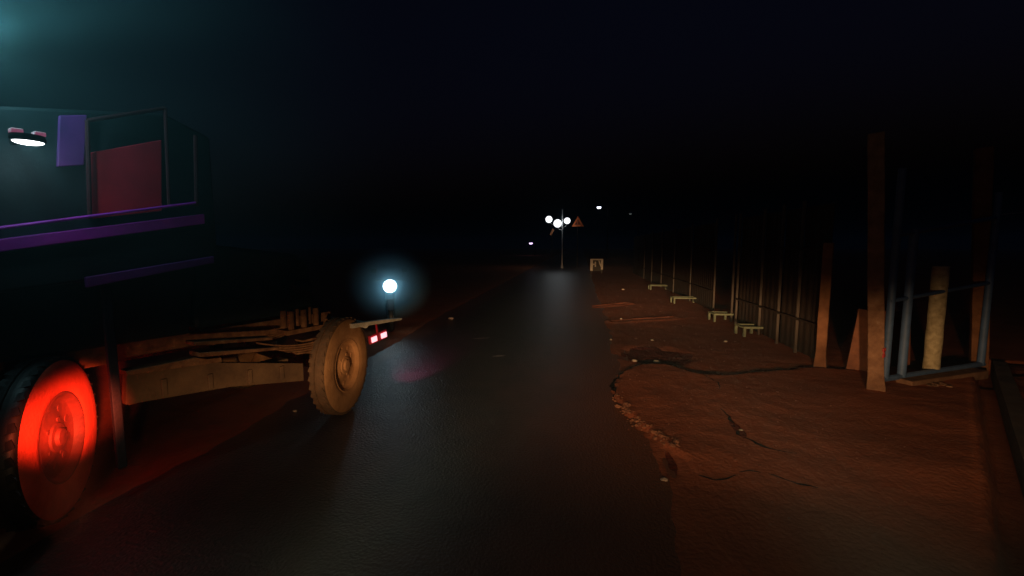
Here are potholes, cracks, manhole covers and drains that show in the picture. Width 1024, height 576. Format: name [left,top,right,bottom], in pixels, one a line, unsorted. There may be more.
pothole [621,347,693,366]
crack [720,408,797,454]
crack [699,470,818,488]
